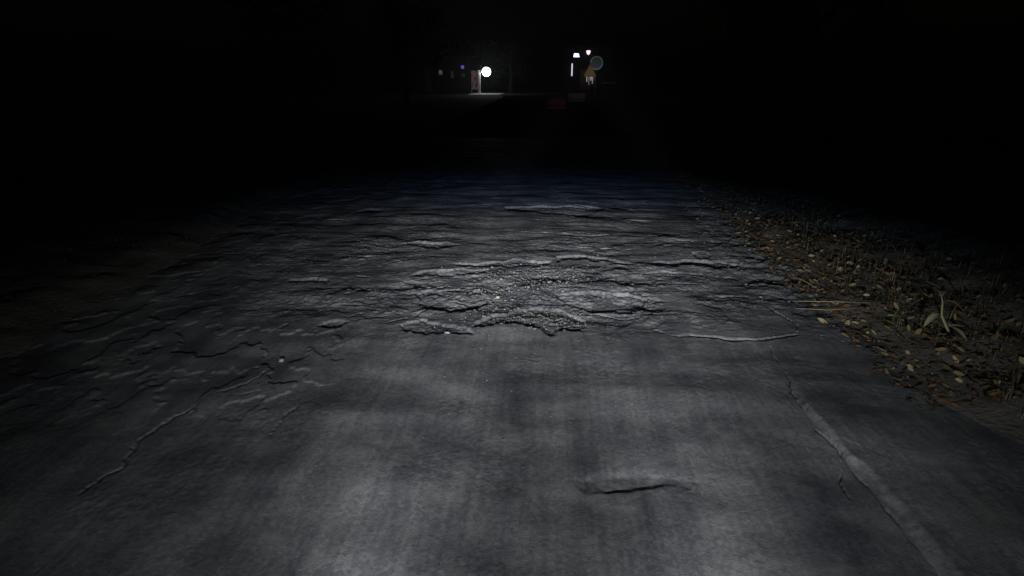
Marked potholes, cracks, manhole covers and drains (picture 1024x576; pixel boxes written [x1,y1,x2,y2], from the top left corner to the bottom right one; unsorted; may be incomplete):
crack [75,363,298,497]
crack [588,270,943,576]
